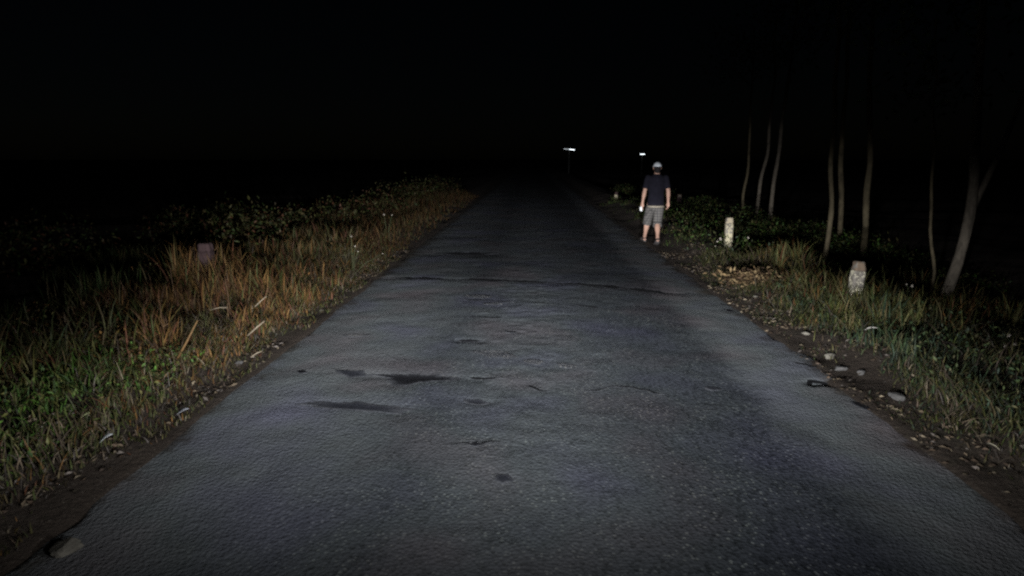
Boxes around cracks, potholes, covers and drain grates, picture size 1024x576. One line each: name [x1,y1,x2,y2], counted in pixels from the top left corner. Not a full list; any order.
crack [396,277,693,318]
pothole [335,370,369,378]
crack [587,386,664,395]
pothole [298,401,417,414]
pothole [494,474,514,484]
pothole [369,374,461,386]
